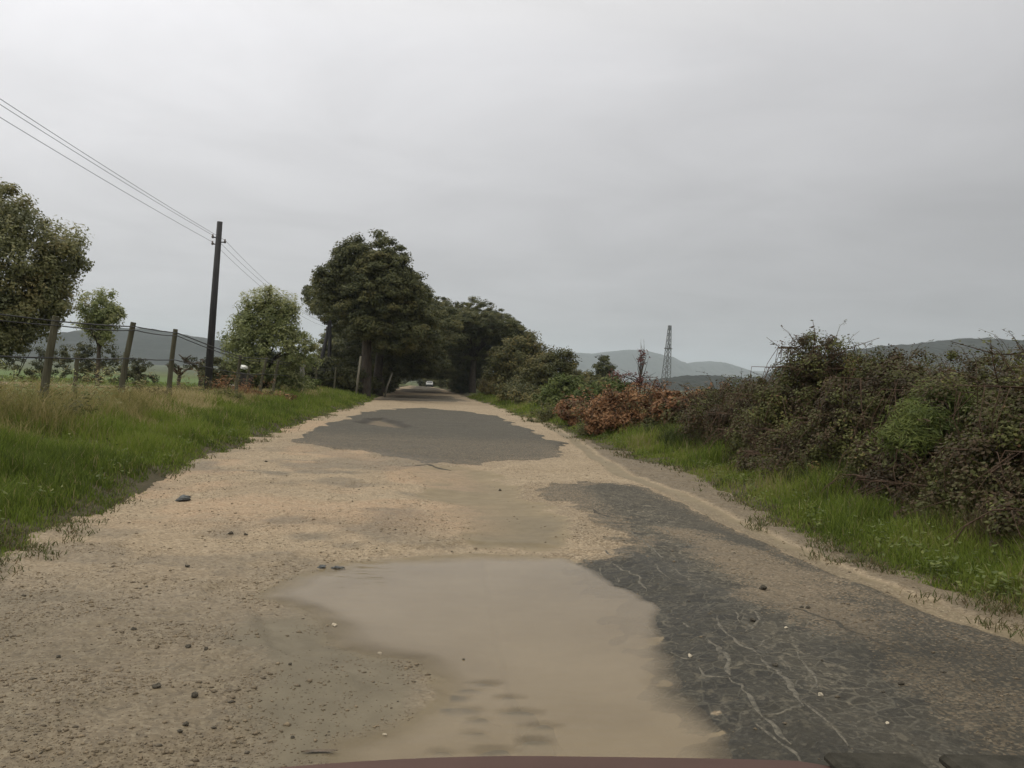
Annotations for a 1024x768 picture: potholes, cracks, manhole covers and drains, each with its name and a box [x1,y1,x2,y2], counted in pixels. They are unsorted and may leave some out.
pothole [248,553,747,764]
crack [657,608,849,761]
